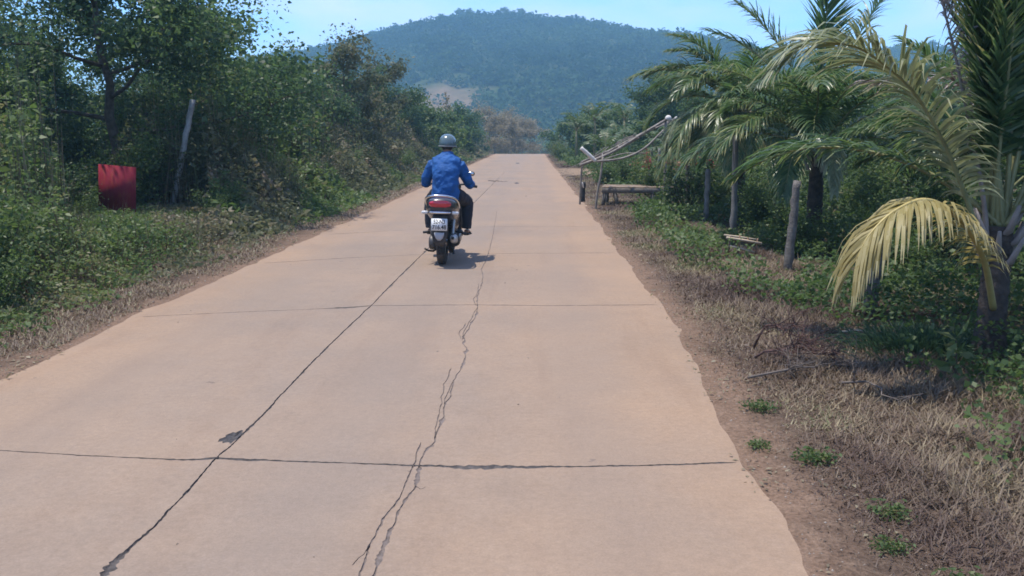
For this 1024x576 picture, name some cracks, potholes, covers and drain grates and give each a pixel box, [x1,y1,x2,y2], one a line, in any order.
pothole [218,430,243,444]
crack [353,211,497,576]
